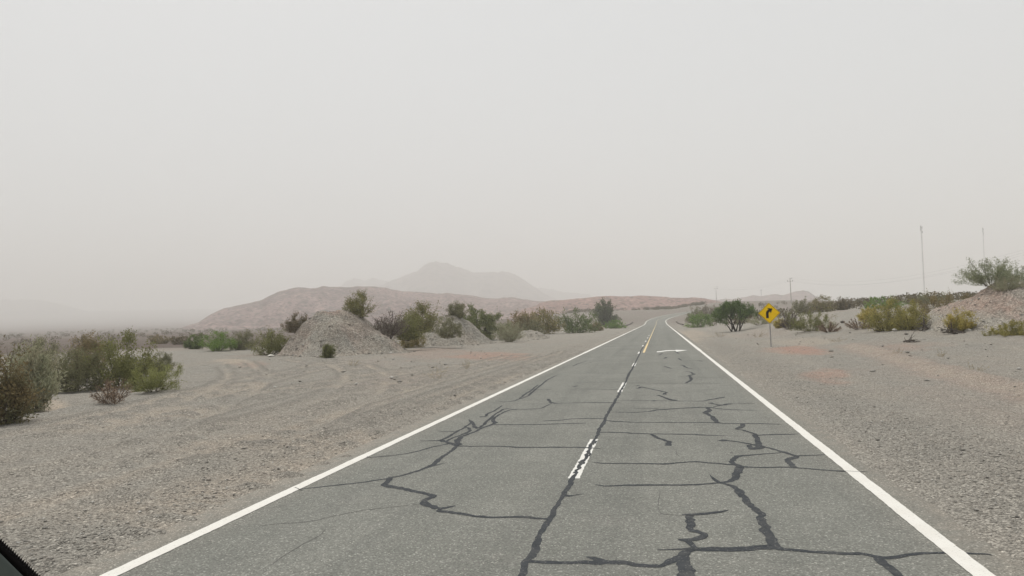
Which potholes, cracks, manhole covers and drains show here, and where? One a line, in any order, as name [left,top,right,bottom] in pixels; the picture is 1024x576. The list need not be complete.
crack [538,373,791,456]
